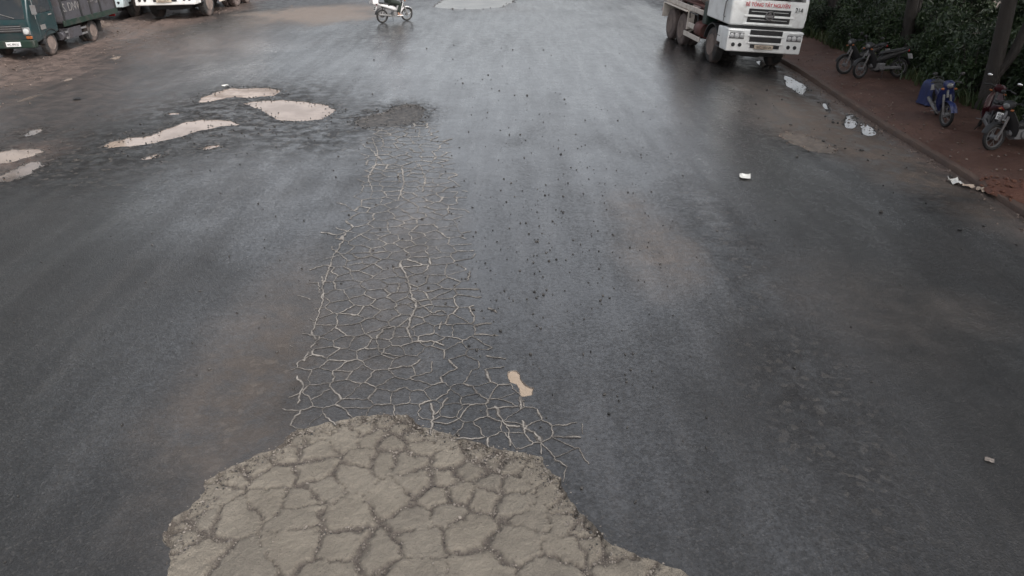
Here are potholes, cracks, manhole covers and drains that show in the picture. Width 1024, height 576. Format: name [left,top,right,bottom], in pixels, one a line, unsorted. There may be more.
pothole [156,412,688,576]
pothole [331,103,429,131]
crack [282,122,589,482]
